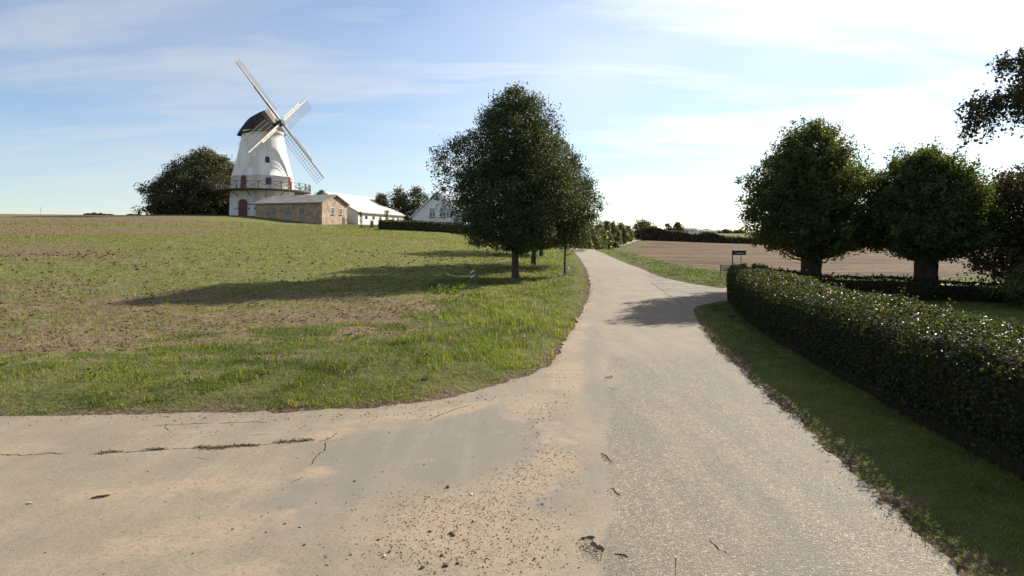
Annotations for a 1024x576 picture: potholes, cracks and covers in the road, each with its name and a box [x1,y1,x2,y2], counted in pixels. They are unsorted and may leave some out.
pothole [575,535,605,565]
crack [0,421,337,483]
